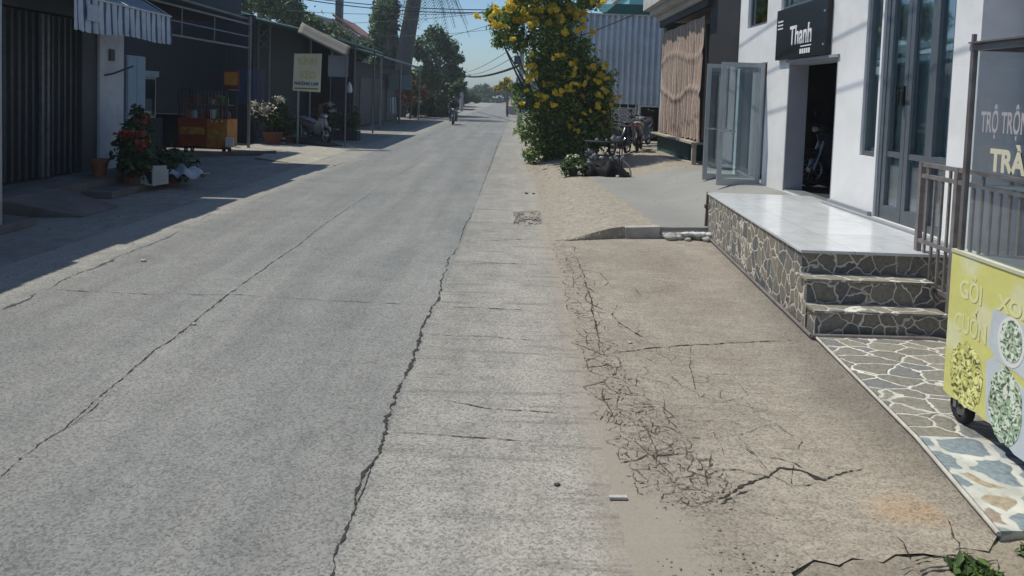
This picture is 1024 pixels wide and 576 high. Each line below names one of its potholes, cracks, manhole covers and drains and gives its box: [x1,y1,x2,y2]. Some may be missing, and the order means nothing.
crack [1,149,439,476]
crack [557,244,869,511]
crack [899,520,1000,572]
crack [330,136,547,576]
